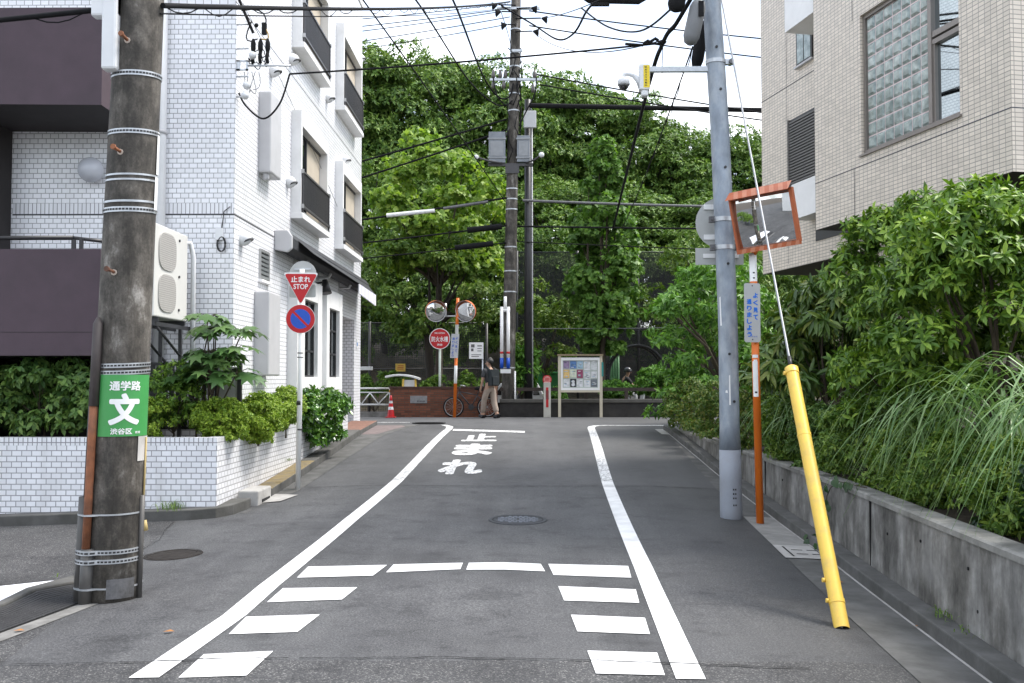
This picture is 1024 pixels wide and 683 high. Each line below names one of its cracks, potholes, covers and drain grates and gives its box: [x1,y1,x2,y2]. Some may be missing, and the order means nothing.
manhole cover [488,514,547,525]
manhole cover [143,549,203,560]
